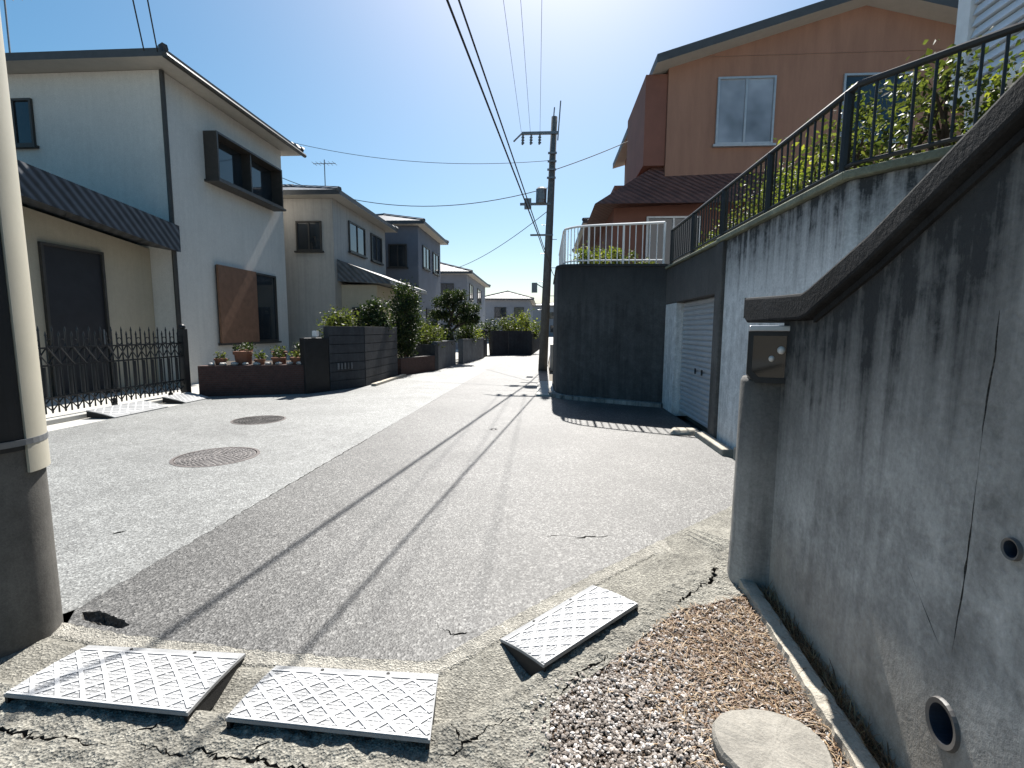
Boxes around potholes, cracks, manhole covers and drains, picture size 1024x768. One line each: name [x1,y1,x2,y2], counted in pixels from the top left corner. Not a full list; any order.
crack [439,654,613,758]
pothole [81,611,129,632]
manhole cover [169,447,260,467]
manhole cover [230,415,286,425]
crack [0,718,309,768]
crack [678,567,725,602]
